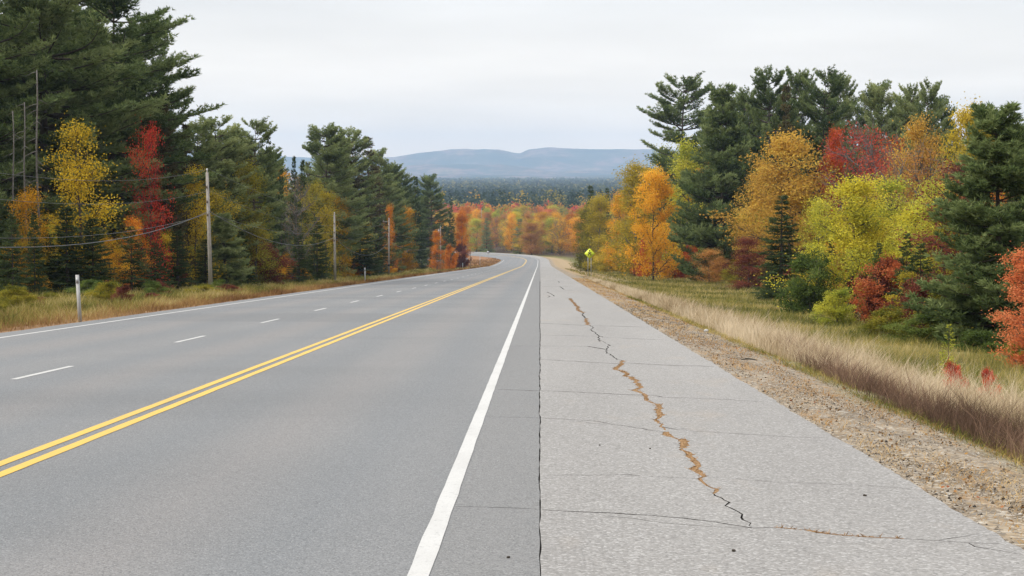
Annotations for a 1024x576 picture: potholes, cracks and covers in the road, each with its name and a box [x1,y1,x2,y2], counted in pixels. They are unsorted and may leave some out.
crack [455,281,1016,554]
